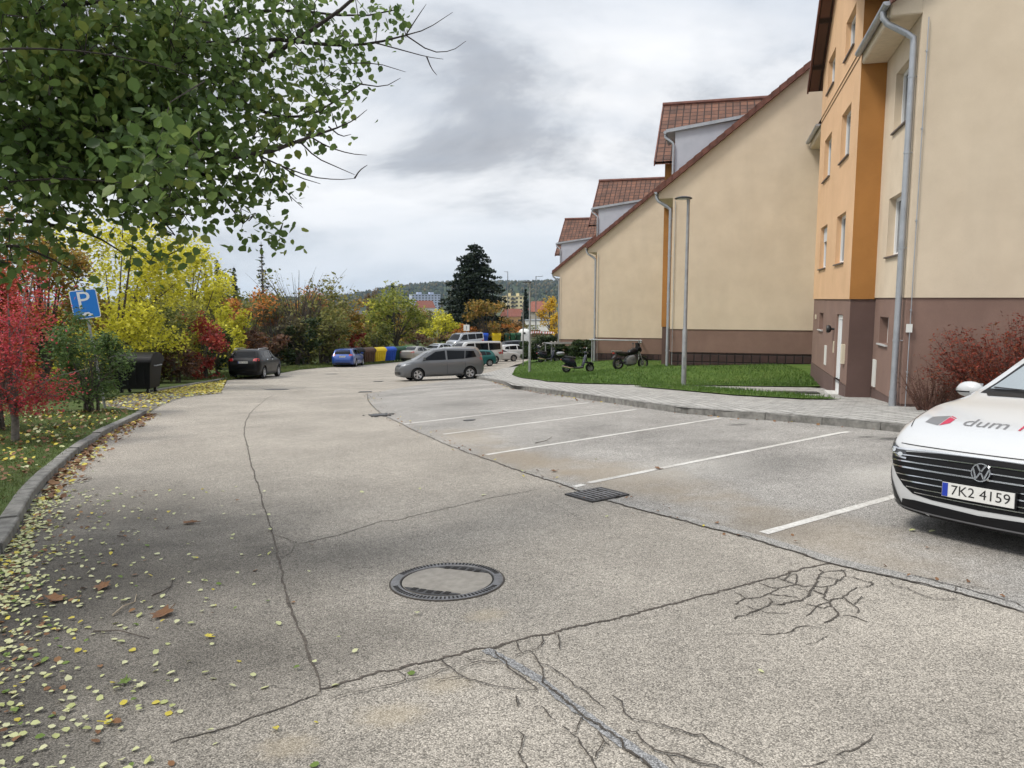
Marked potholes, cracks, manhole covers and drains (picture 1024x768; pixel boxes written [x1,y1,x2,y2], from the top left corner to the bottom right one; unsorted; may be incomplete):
manhole cover [389,563,505,601]
crack [734,569,874,644]
crack [329,633,763,768]
crack [170,396,535,743]
drain grate [565,487,629,503]
crack [800,733,875,766]
